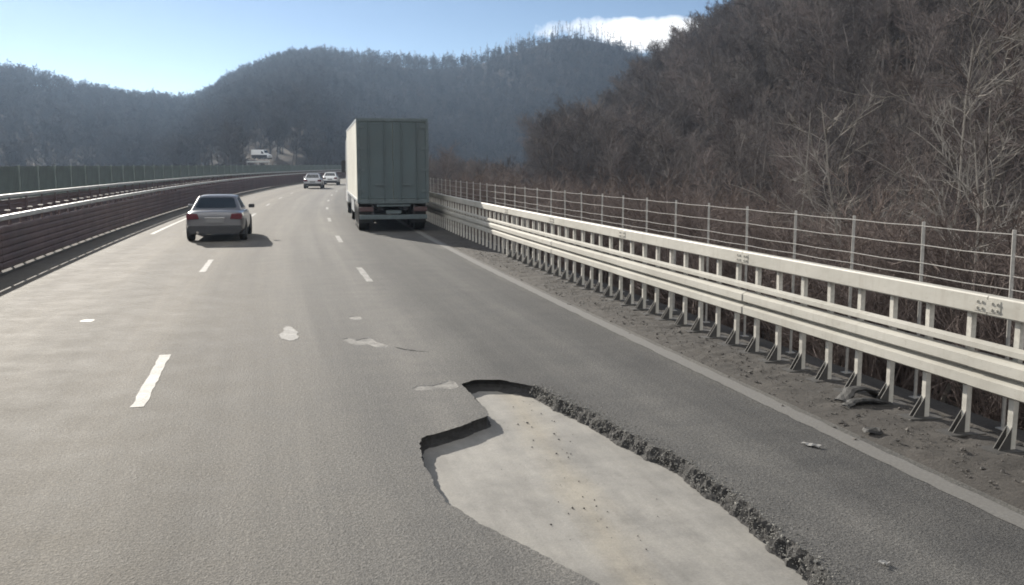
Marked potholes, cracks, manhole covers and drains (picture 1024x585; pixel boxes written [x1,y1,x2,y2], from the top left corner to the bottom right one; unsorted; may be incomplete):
pothole [419,380,860,585]
